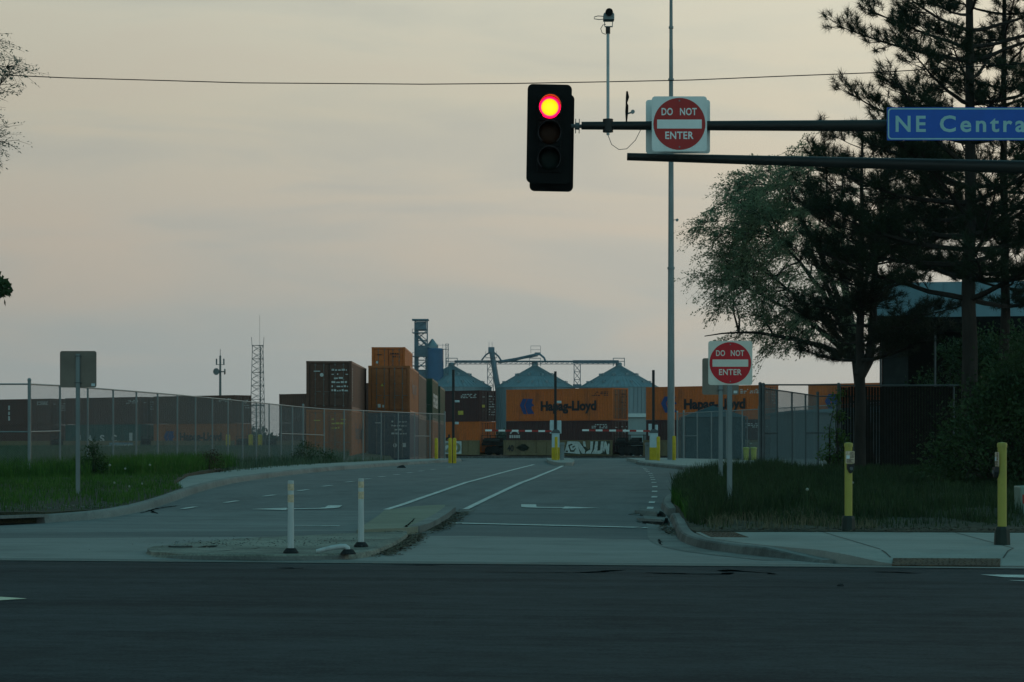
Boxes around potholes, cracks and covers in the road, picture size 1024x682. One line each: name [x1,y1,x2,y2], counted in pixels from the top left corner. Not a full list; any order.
drain grate [0,514,49,525]
